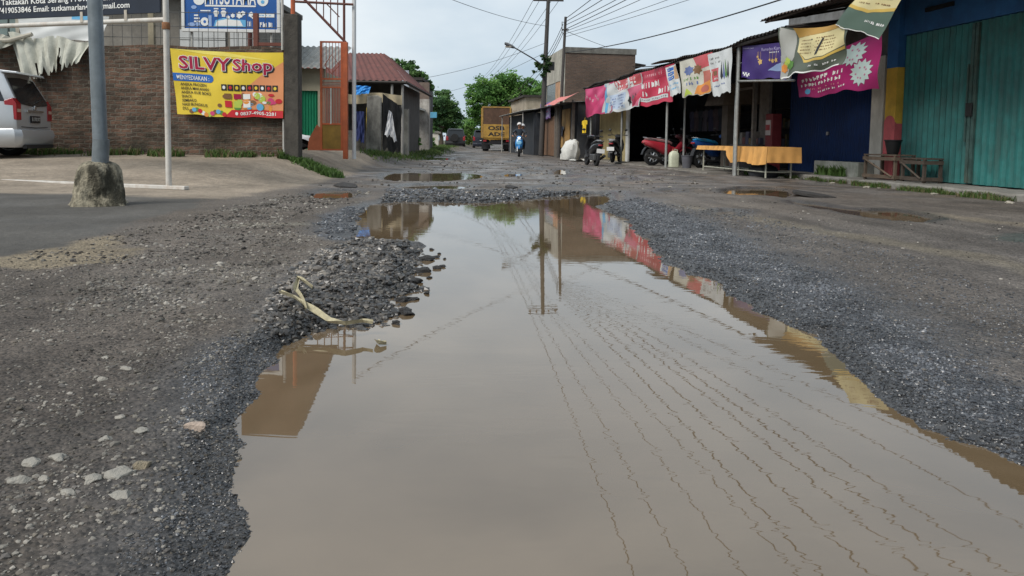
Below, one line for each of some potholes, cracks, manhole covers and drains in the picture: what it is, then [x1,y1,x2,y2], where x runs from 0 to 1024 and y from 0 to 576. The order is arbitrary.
pothole [371,171,495,182]
pothole [125,190,1024,576]
pothole [710,186,802,198]
pothole [305,188,367,199]
